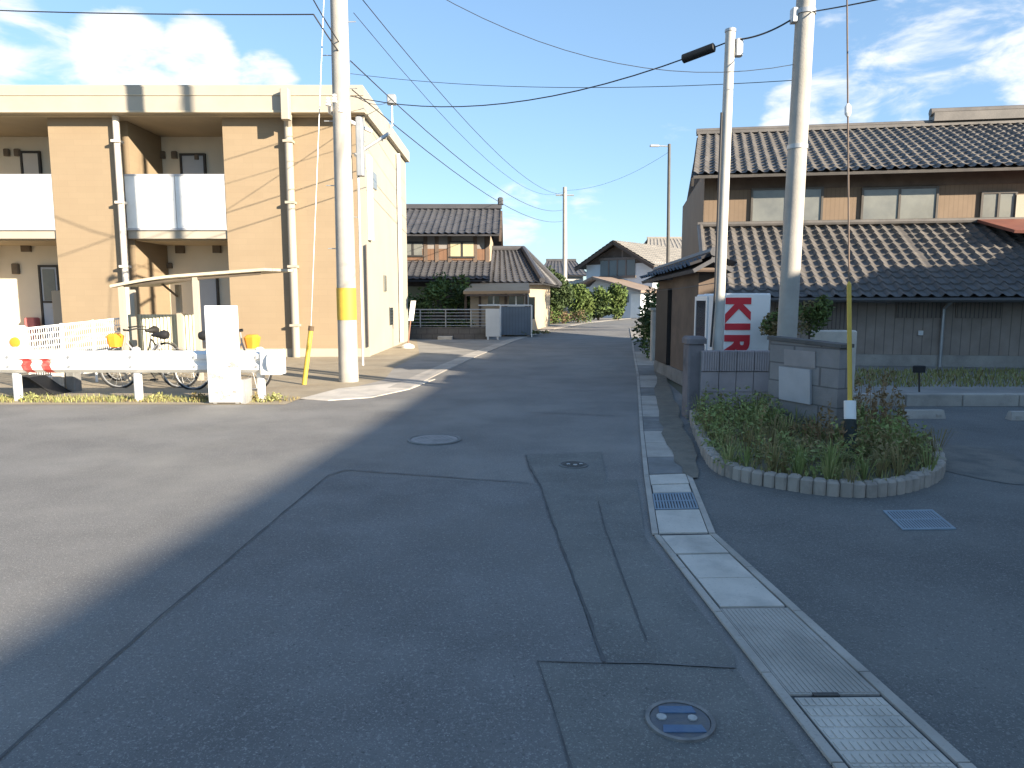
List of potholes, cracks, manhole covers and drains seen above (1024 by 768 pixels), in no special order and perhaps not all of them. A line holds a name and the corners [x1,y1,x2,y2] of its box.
manhole cover [645,700,716,743]
manhole cover [559,461,589,469]
manhole cover [407,434,461,446]
drain grate [883,509,956,530]
